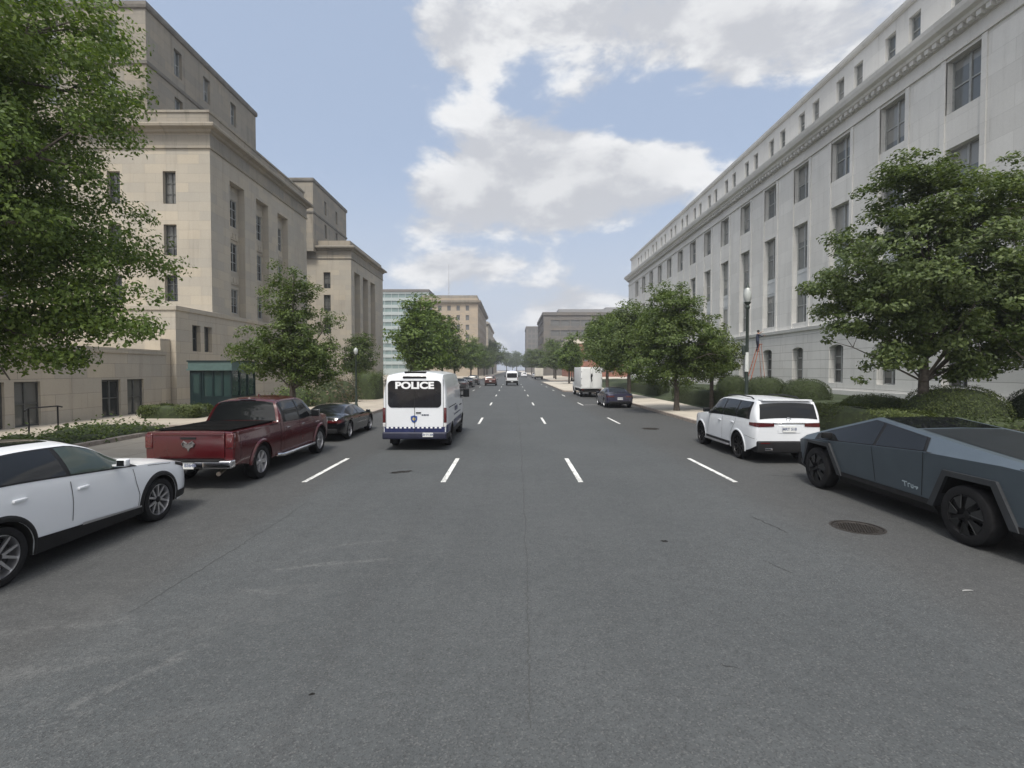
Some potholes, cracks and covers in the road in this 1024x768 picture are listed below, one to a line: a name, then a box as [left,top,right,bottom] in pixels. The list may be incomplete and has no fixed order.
manhole cover [829,520,887,535]
